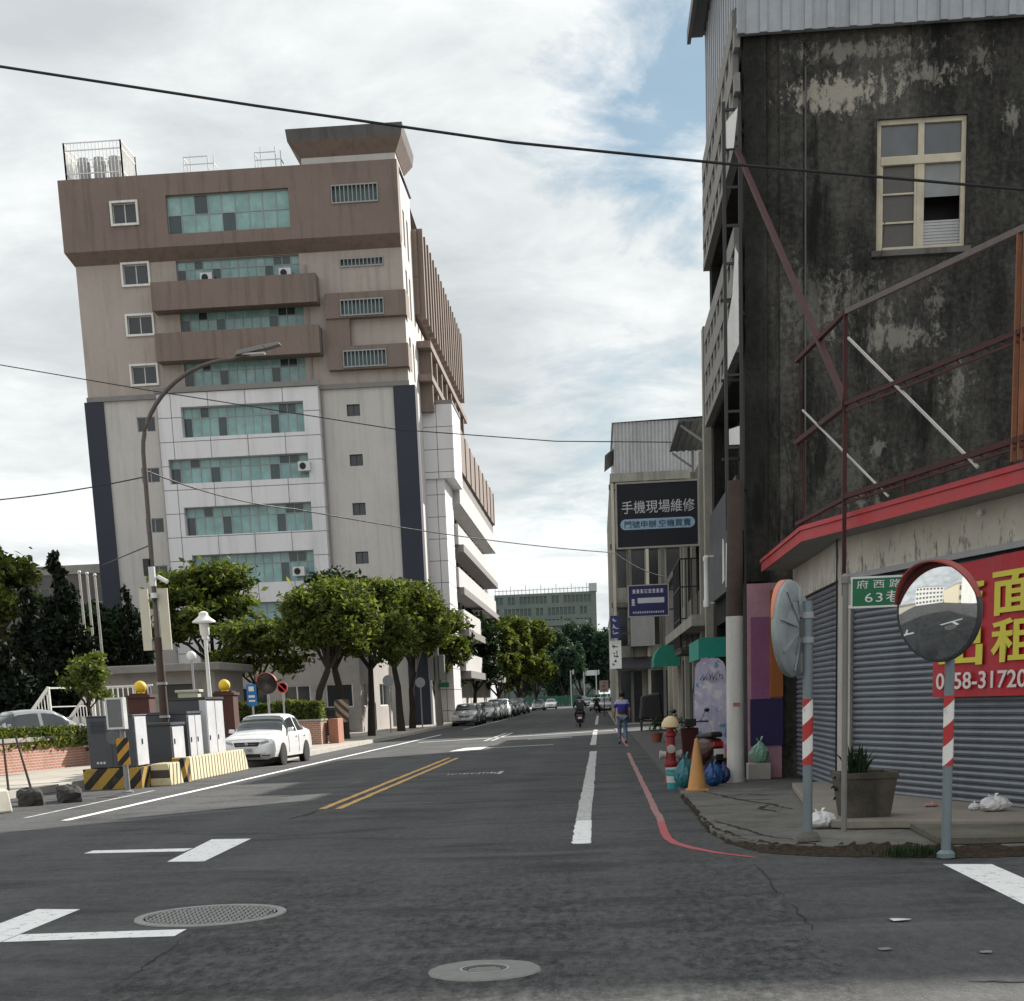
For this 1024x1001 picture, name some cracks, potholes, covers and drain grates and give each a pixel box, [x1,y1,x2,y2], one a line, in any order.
manhole cover [134,904,287,927]
crack [753,864,813,930]
manhole cover [428,960,541,982]
crack [704,791,793,839]
